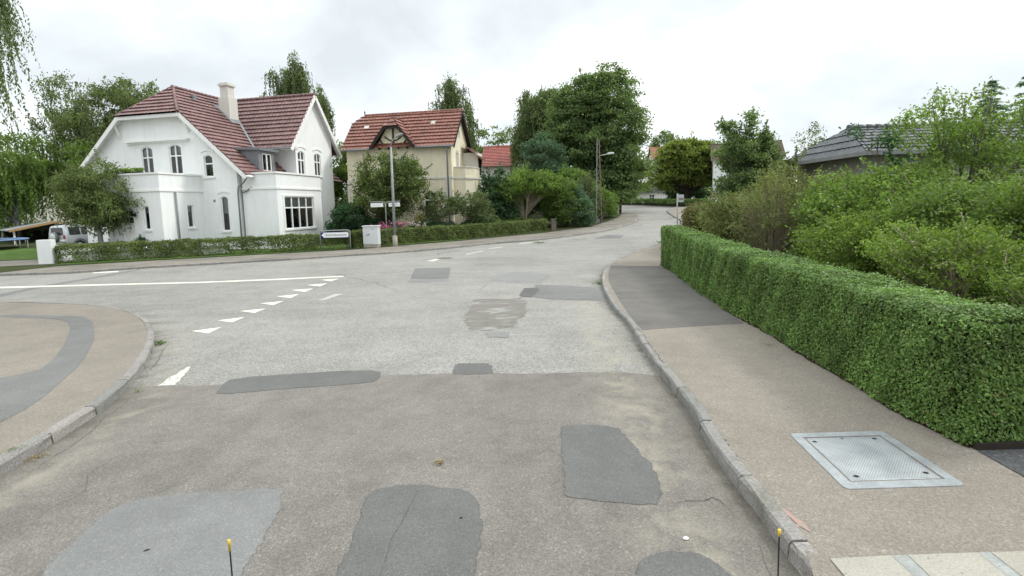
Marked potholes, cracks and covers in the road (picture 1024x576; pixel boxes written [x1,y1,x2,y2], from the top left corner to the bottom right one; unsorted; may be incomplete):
crack [27,396,133,475]
manhole cover [791,431,963,489]
